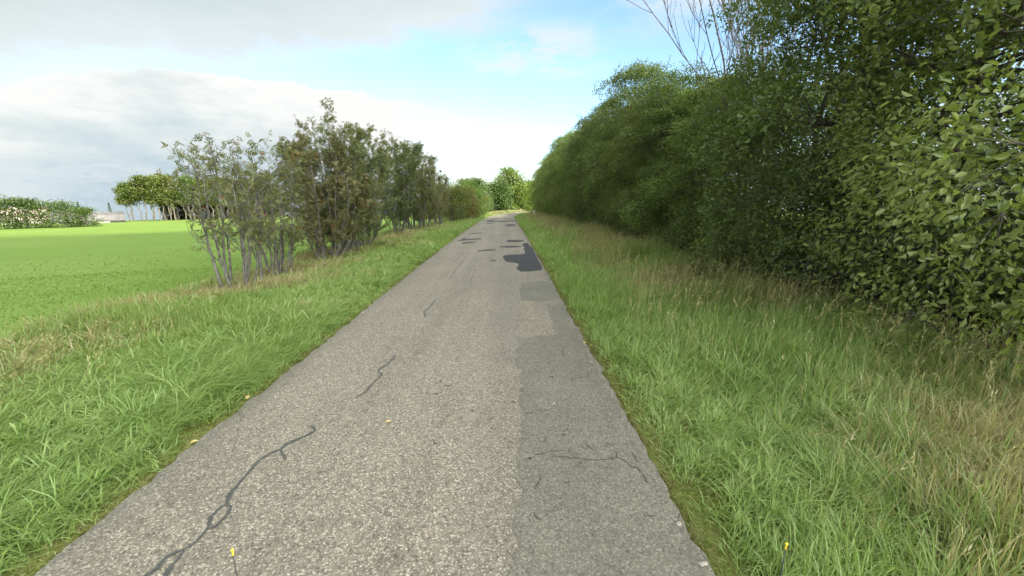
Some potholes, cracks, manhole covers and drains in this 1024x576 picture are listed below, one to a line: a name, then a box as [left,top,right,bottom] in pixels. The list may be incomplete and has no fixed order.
crack [524,348,657,521]
